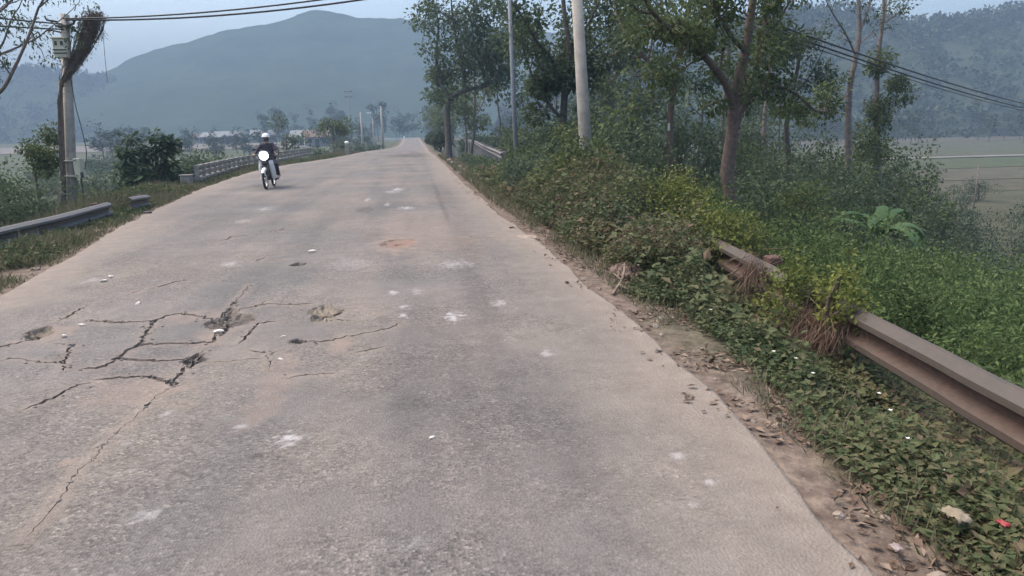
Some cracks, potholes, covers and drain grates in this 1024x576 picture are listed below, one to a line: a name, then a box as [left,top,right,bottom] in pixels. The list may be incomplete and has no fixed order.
pothole [303,304,347,326]
pothole [200,304,262,338]
pothole [177,352,211,370]
crack [0,278,408,547]
pothole [22,325,56,343]
